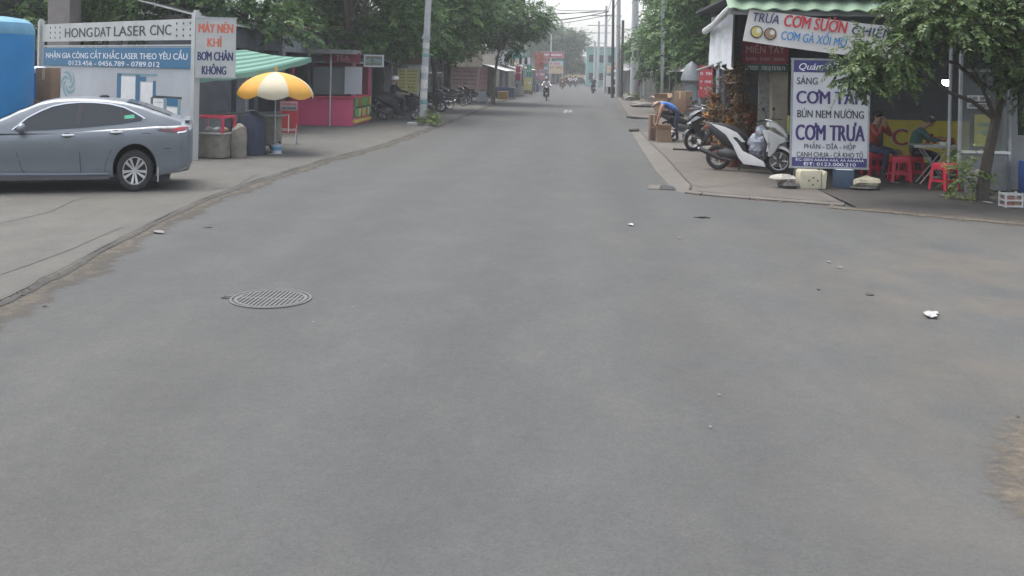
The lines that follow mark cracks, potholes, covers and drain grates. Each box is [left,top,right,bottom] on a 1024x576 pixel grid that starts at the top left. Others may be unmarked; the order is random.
manhole cover [221,289,312,309]
